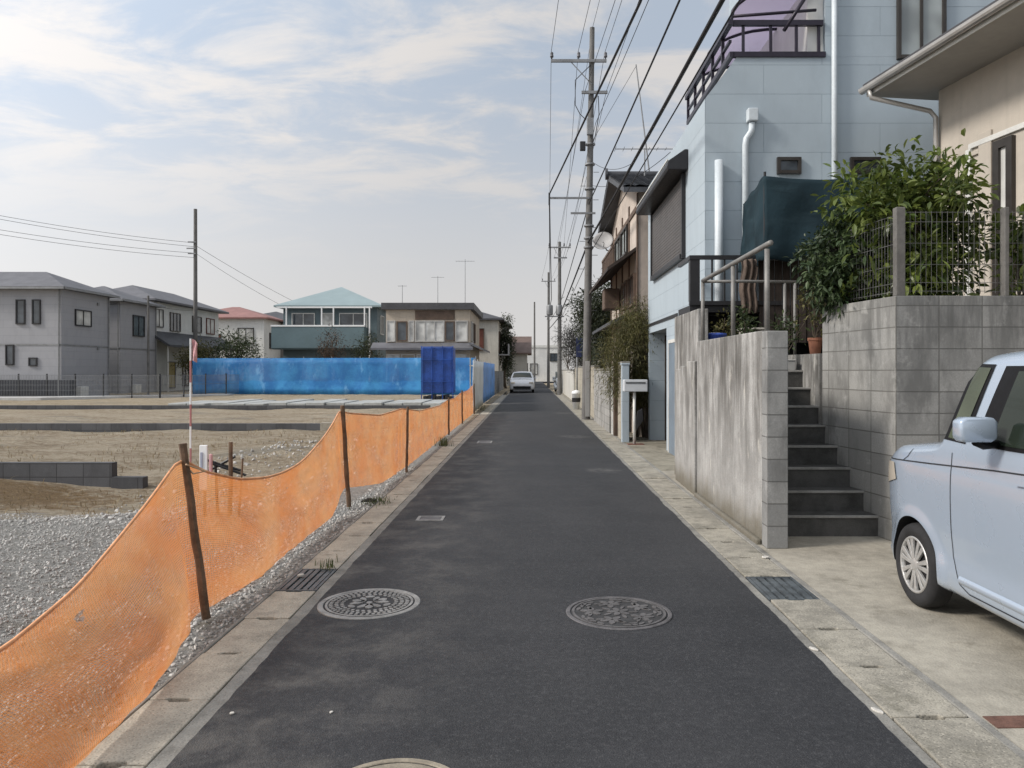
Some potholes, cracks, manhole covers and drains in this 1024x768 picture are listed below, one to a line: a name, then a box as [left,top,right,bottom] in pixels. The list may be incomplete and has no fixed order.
manhole cover [317,588,420,620]
drain grate [745,577,819,602]
drain grate [276,568,338,593]
manhole cover [566,596,672,630]
manhole cover [353,758,449,768]
